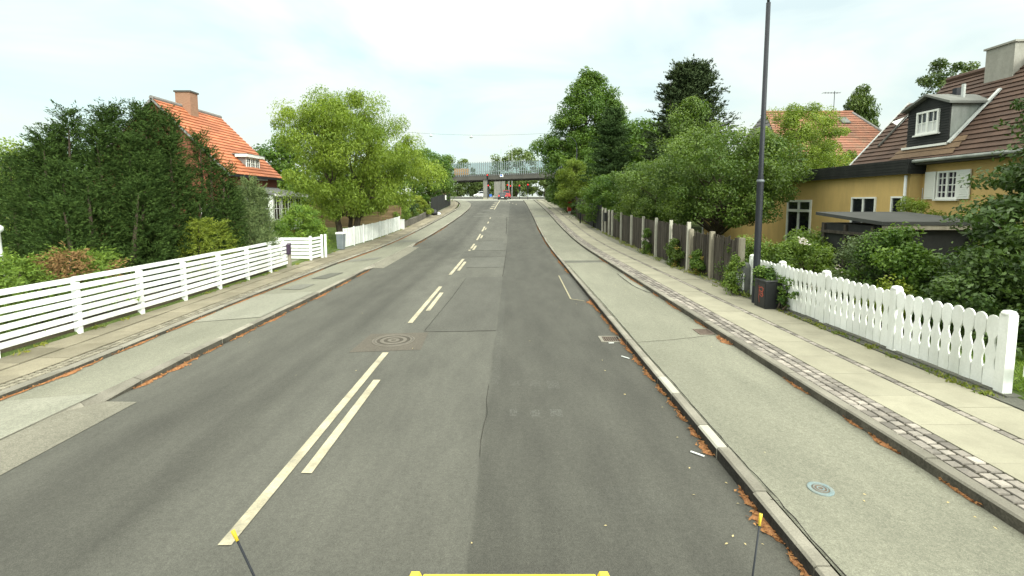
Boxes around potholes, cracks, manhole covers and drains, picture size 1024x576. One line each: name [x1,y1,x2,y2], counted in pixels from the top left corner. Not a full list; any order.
manhole cover [807,482,835,497]
manhole cover [372,334,415,347]
